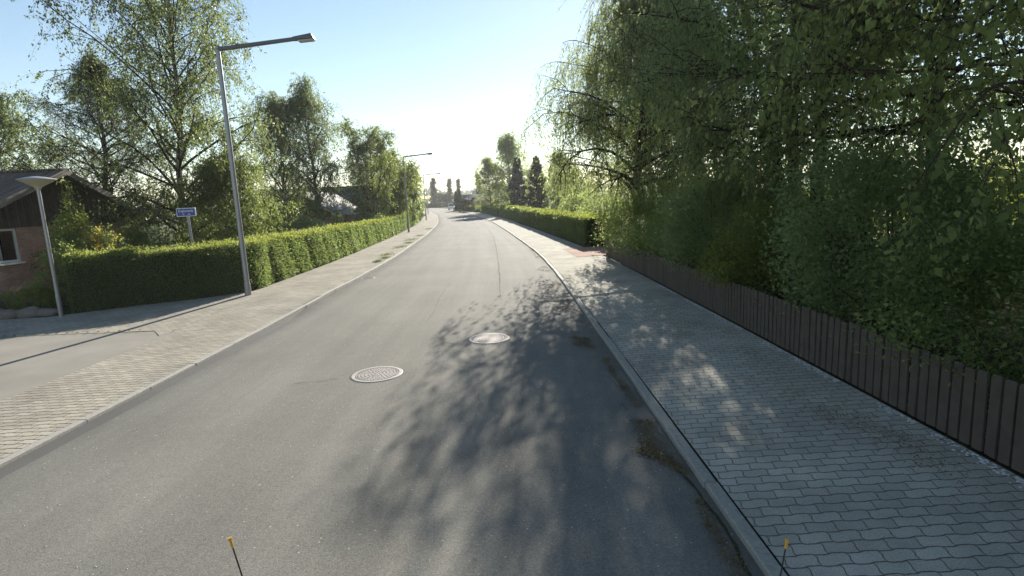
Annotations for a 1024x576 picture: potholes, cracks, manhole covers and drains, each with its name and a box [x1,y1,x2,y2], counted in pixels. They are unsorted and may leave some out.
manhole cover [467,333,511,344]
manhole cover [349,366,405,383]
